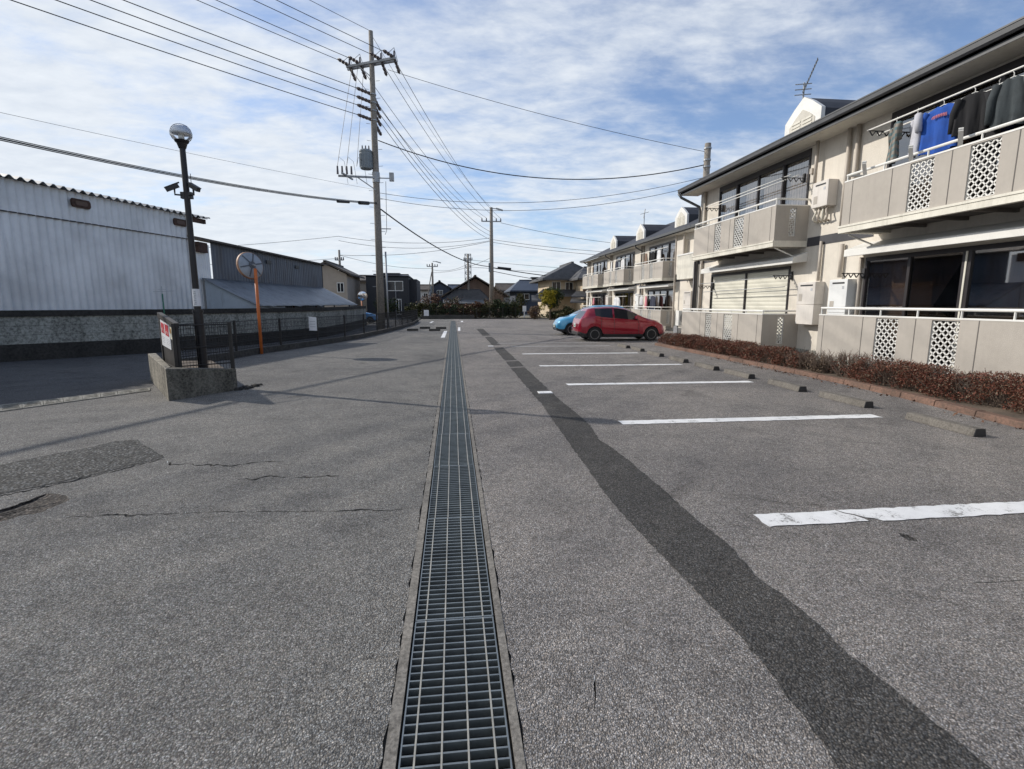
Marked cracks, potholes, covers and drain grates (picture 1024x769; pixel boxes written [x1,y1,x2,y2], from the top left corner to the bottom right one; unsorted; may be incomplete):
crack [66,509,399,518]
drain grate [434,433,474,466]
drain grate [444,369,462,377]
drain grate [442,385,465,397]
drain grate [428,465,481,519]
drain grate [438,412,470,434]
drain grate [416,517,493,622]
drain grate [440,397,467,413]
crack [169,461,338,480]
drain grate [443,376,463,386]
drain grate [398,616,513,769]
pothole [0,493,70,522]
